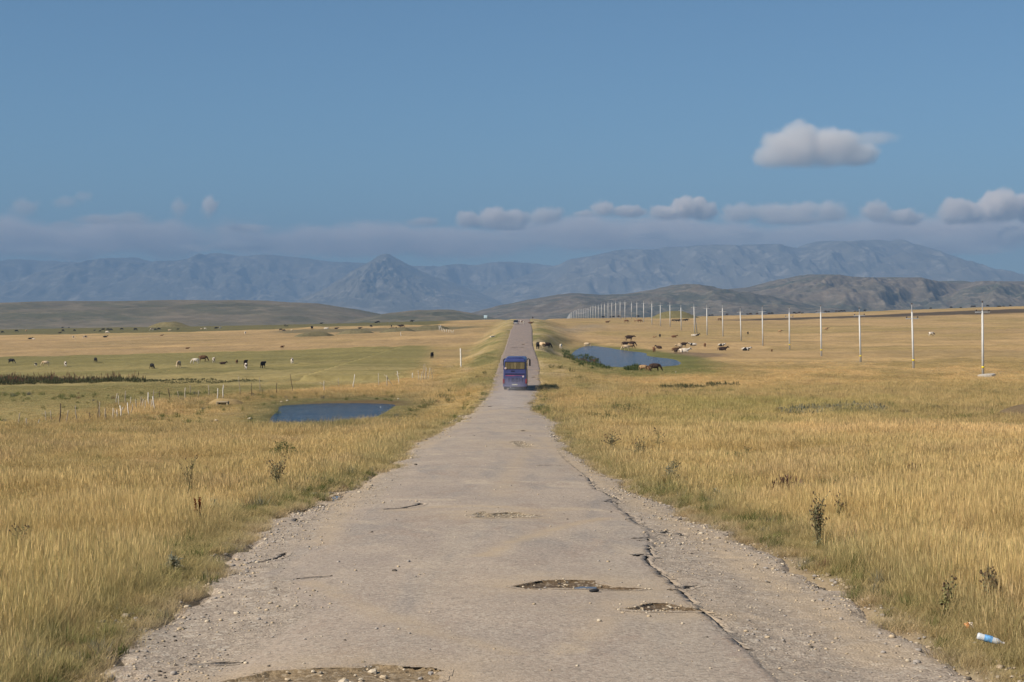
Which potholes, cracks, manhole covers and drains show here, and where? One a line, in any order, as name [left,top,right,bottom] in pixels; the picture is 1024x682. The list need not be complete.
pothole [506,578,652,591]
pothole [207,660,454,682]
crack [252,552,330,579]
pothole [614,600,733,616]
